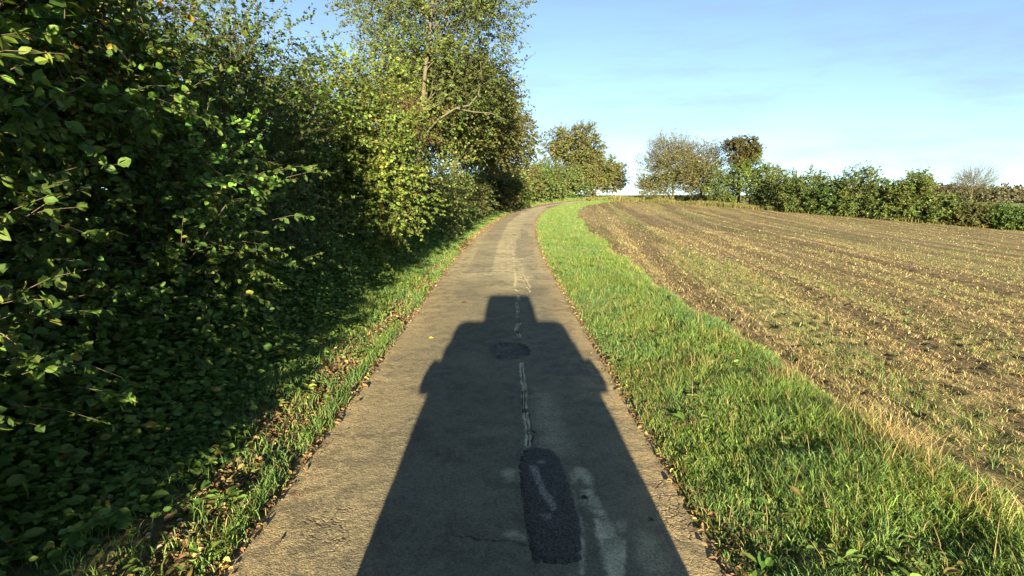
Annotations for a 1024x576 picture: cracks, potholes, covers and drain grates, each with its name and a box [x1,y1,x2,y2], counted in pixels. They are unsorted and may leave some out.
crack [452,532,529,548]
